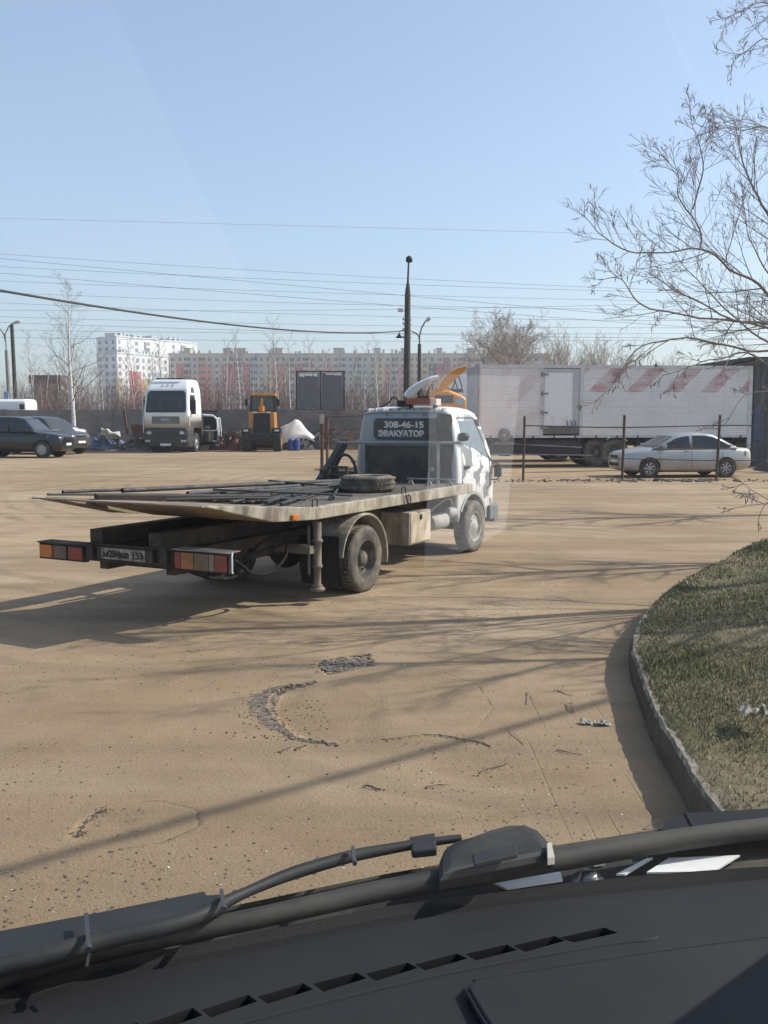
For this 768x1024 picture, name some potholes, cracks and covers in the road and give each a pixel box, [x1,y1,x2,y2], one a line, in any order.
crack [382,734,512,776]
